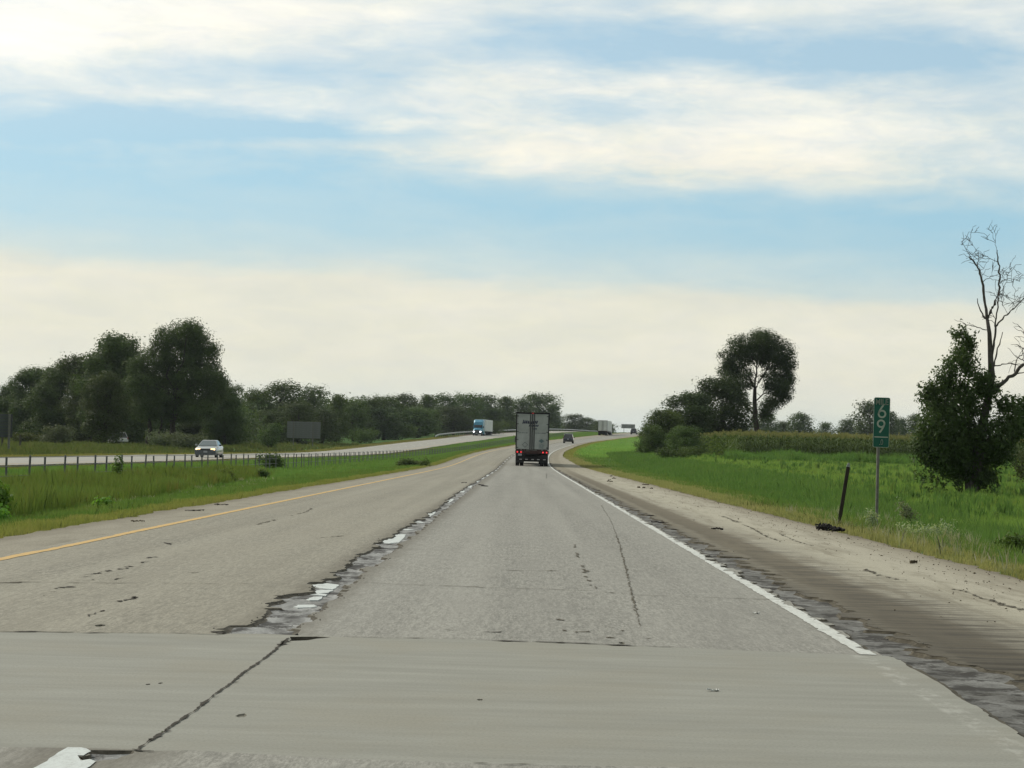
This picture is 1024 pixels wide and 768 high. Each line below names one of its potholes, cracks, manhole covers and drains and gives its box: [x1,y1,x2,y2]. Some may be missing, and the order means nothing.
pothole [214,463,503,635]
crack [348,505,786,647]
